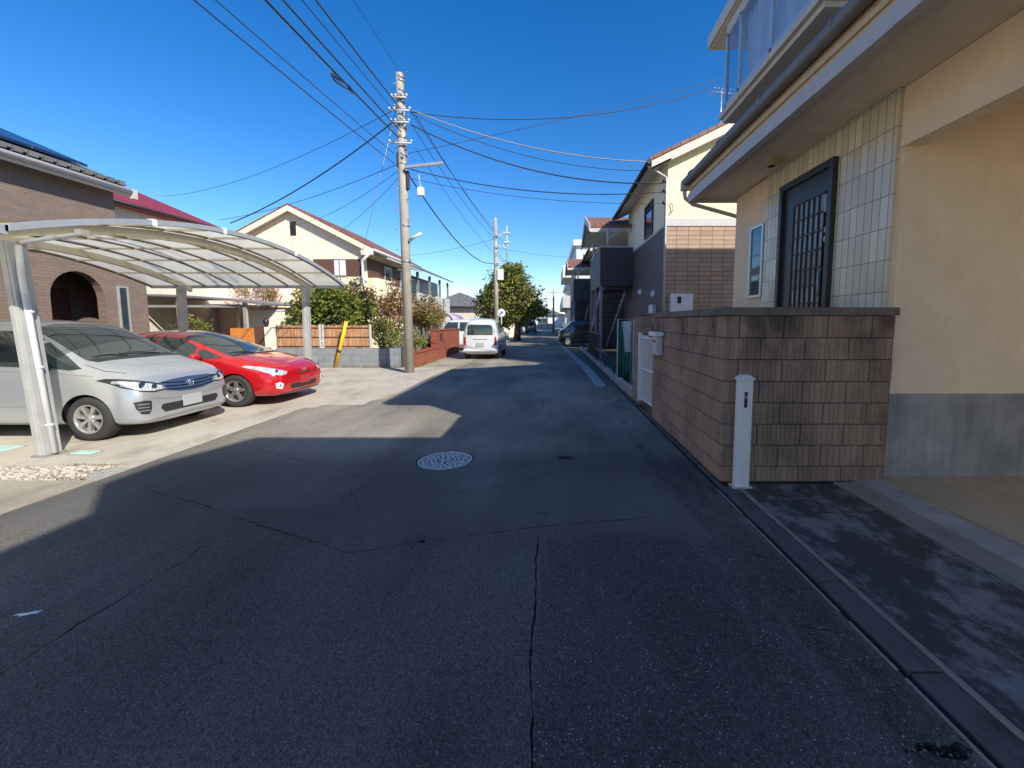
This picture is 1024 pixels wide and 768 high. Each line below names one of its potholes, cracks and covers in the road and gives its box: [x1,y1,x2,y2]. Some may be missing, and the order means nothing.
manhole cover [415,451,475,471]
crack [438,515,664,768]
crack [0,532,224,674]
crack [142,486,411,553]
pothole [885,737,977,768]
